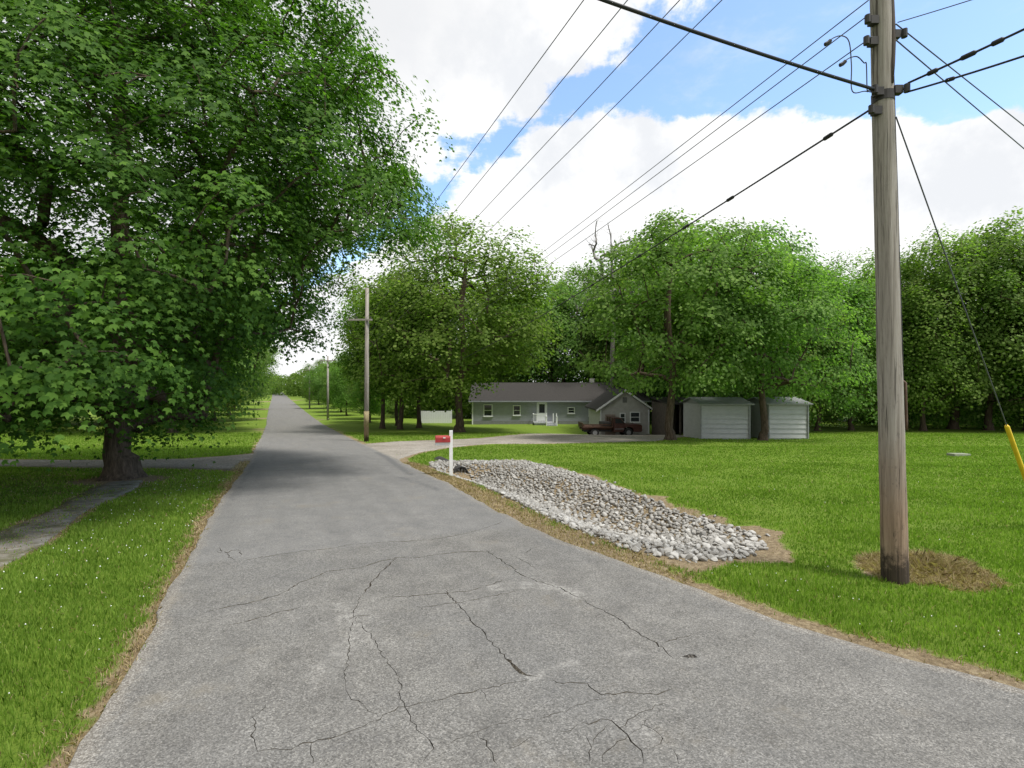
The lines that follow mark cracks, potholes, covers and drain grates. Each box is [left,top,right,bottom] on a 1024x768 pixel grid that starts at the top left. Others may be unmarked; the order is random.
crack [207,549,690,763]
